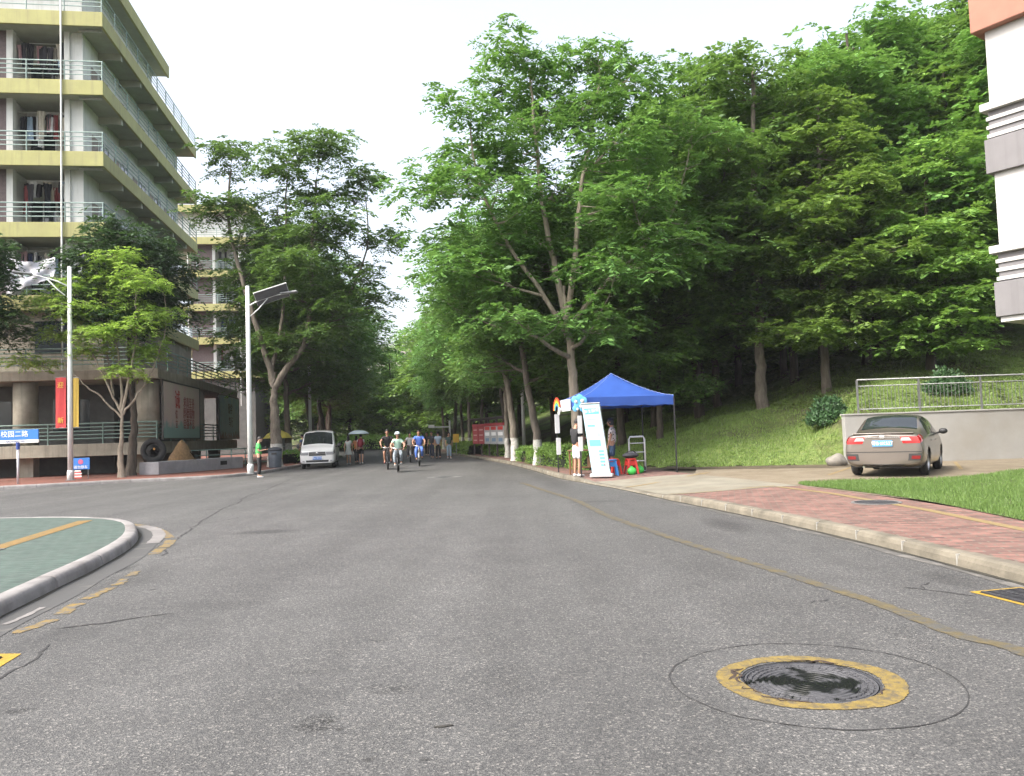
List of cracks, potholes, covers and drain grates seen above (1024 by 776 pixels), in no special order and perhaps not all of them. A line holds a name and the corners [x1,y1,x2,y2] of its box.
drain grate [971,587,1024,605]
crack [0,613,173,679]
manhole cover [716,655,909,710]
